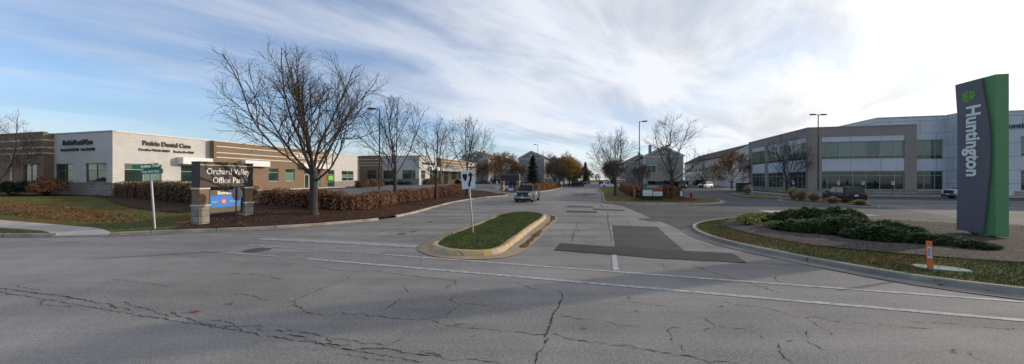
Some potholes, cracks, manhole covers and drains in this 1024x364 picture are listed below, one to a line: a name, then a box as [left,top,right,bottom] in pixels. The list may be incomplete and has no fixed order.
crack [0,265,734,364]
crack [693,265,1017,364]
